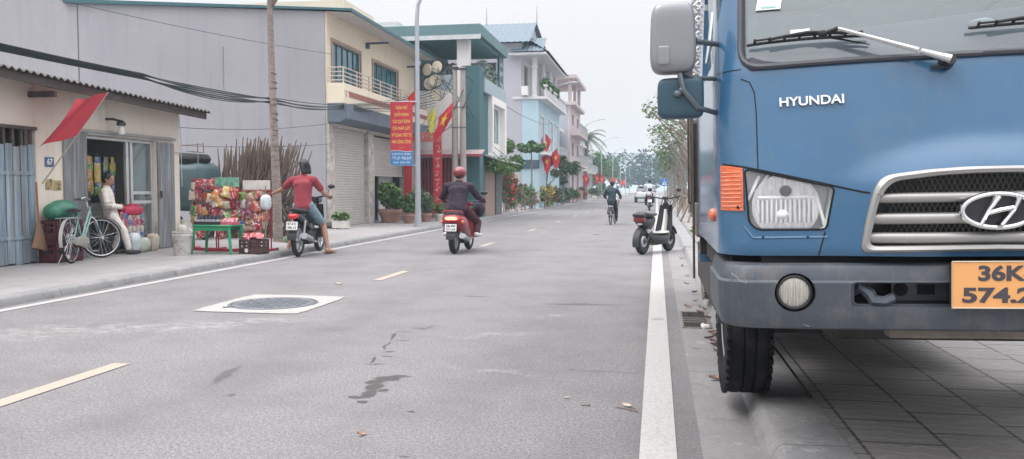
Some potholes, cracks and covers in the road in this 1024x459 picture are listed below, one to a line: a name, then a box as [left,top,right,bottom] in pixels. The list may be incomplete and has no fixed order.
manhole cover [193,294,343,314]
drain grate [679,311,712,329]
